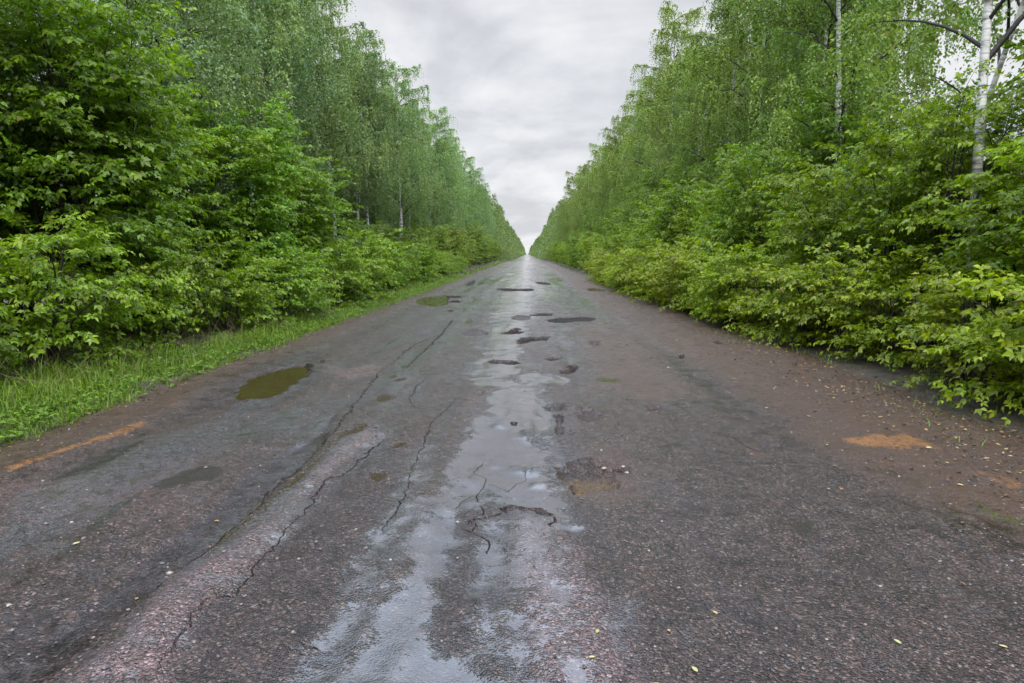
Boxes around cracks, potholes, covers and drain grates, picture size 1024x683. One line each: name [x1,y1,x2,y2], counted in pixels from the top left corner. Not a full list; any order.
pothole [553,457,634,496]
pothole [559,364,579,375]
pothole [516,336,550,344]
crack [158,436,387,674]
pothole [231,363,314,400]
crack [456,463,557,555]
crack [367,320,459,534]
